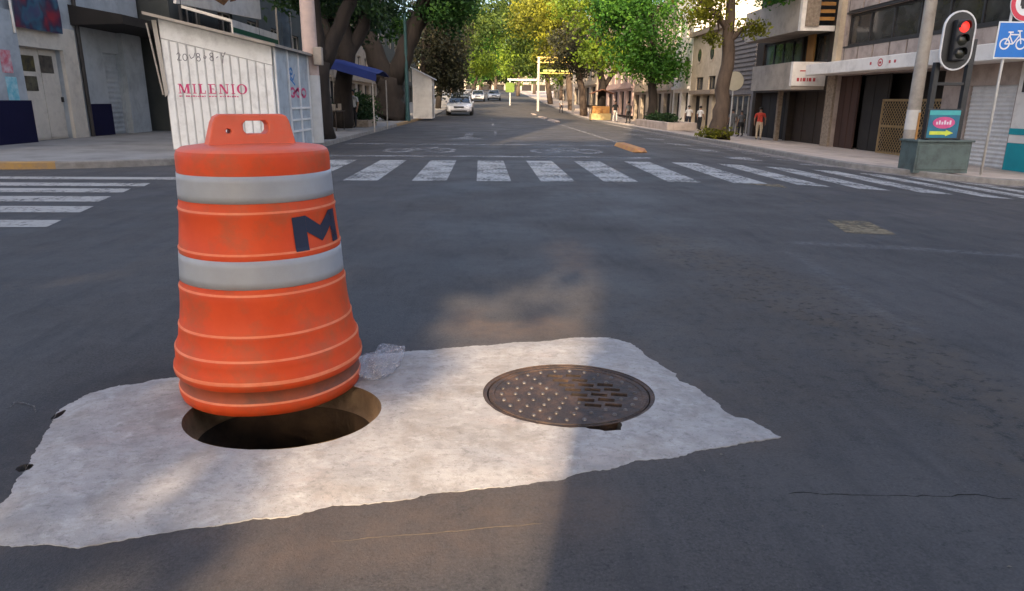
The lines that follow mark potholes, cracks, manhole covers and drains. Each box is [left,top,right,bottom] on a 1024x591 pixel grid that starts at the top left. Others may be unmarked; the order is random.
manhole cover [483,364,655,431]
crack [331,523,542,542]
